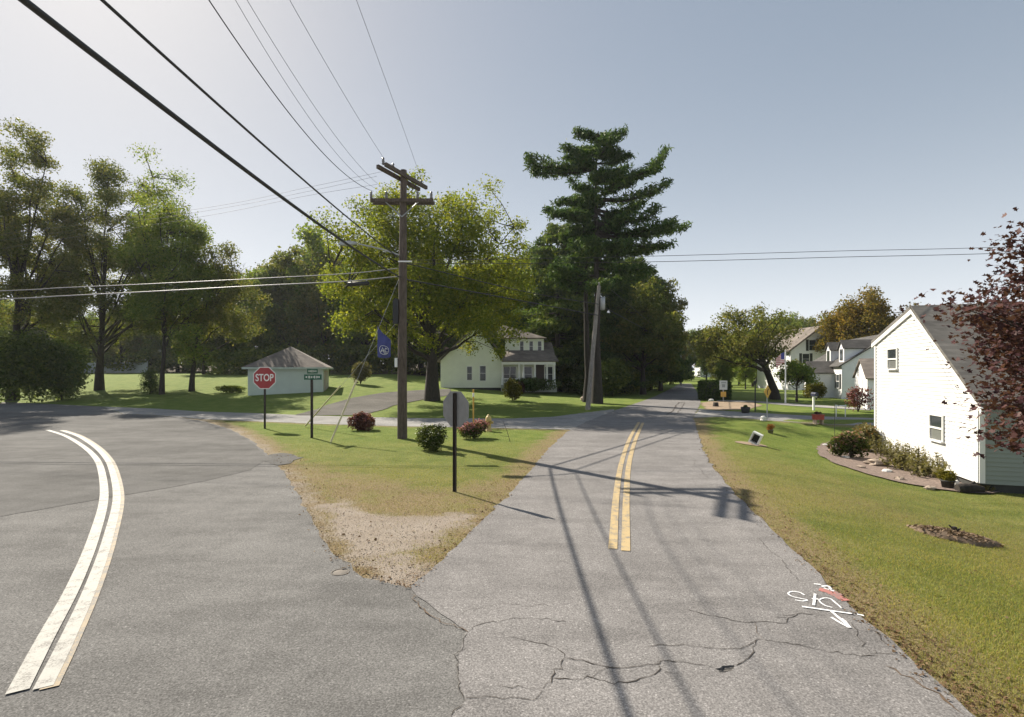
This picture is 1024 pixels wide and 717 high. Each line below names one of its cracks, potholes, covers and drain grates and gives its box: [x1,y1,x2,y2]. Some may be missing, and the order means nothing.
crack [412,594,682,715]
crack [644,610,963,714]
utility cover [331,568,350,576]
